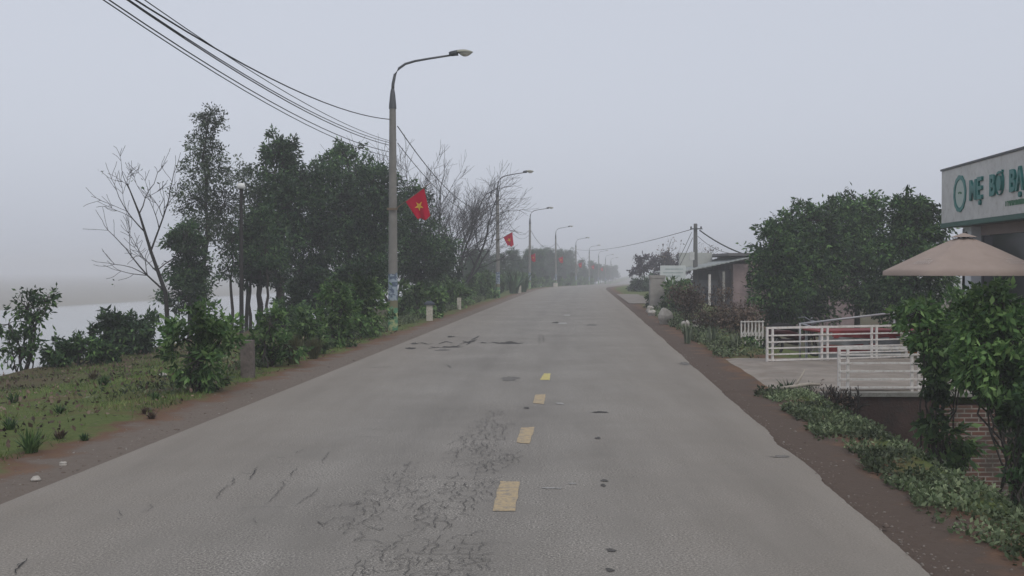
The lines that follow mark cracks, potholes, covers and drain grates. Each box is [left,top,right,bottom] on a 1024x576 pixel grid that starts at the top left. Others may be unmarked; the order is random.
crack [216,409,521,576]
